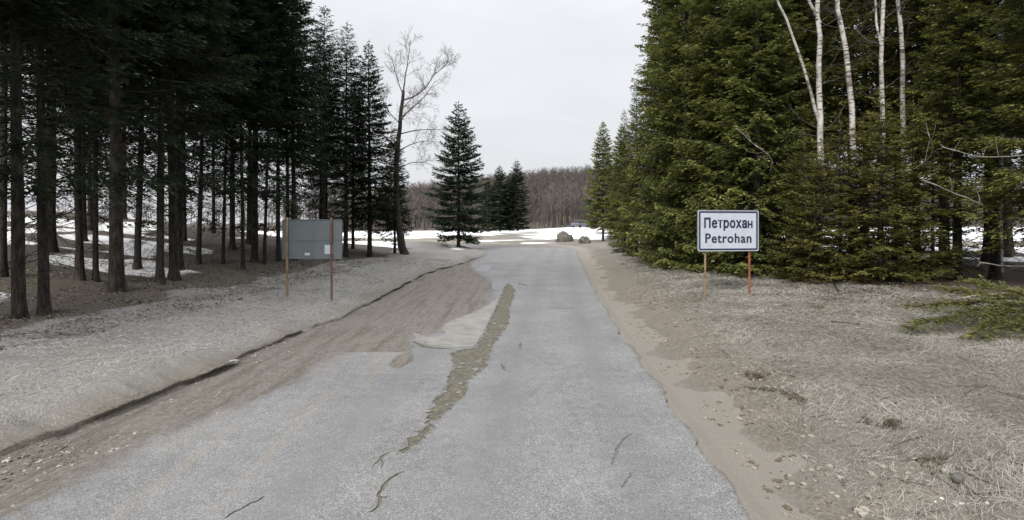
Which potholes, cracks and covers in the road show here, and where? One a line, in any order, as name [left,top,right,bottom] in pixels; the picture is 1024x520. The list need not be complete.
crack [611,433,632,488]
crack [224,496,264,519]
crack [369,452,404,512]
